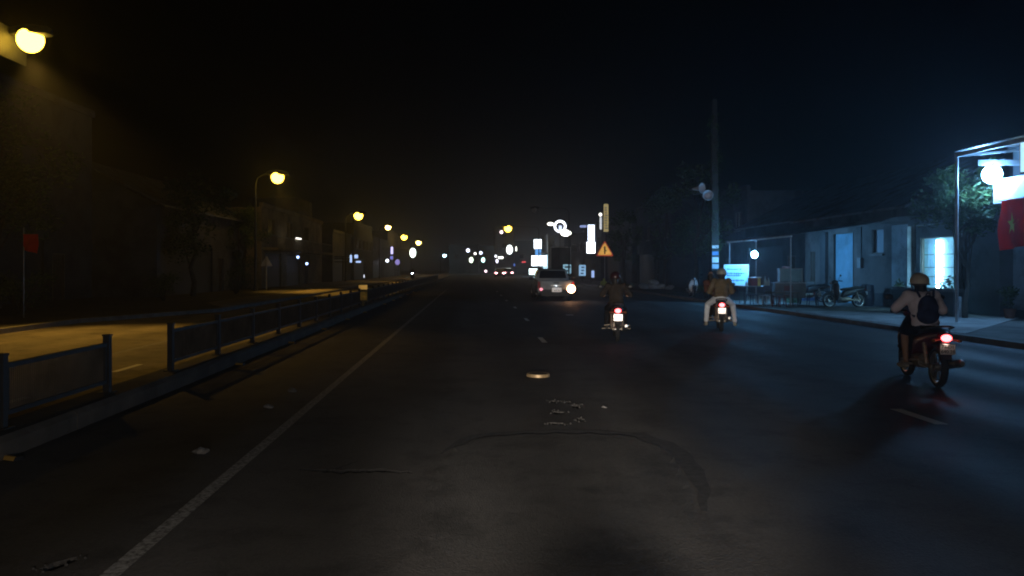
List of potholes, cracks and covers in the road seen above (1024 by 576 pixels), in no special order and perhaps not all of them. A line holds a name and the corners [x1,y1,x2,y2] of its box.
crack [298,461,412,474]
